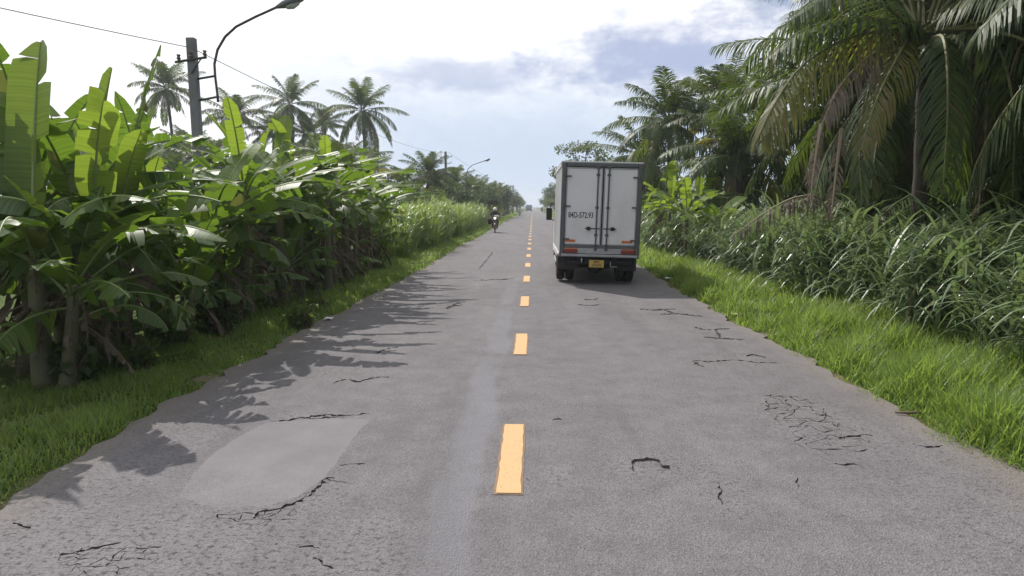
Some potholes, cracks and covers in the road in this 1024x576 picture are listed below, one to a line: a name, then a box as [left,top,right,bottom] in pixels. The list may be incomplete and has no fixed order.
crack [640,309,766,367]
crack [765,394,873,466]
crack [58,542,159,576]
crack [216,463,365,525]
crack [271,413,366,422]
